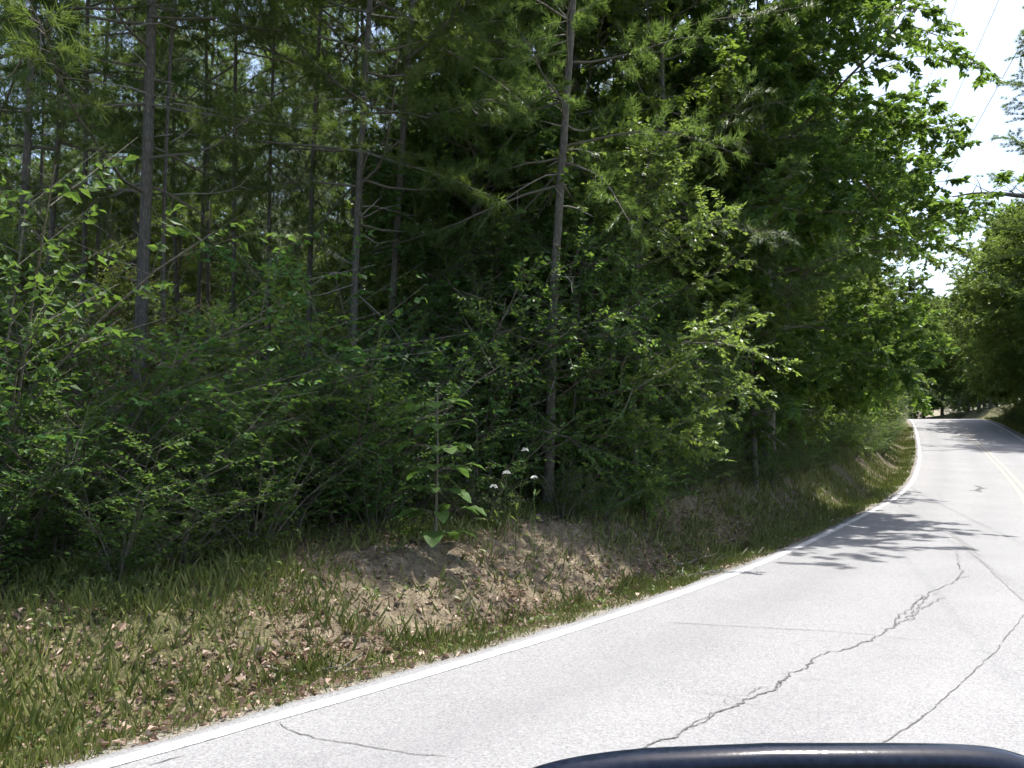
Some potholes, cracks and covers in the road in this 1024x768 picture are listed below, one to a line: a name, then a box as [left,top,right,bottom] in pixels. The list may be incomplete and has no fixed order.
crack [882,616,1023,743]
crack [643,551,969,748]
crack [280,721,443,756]
